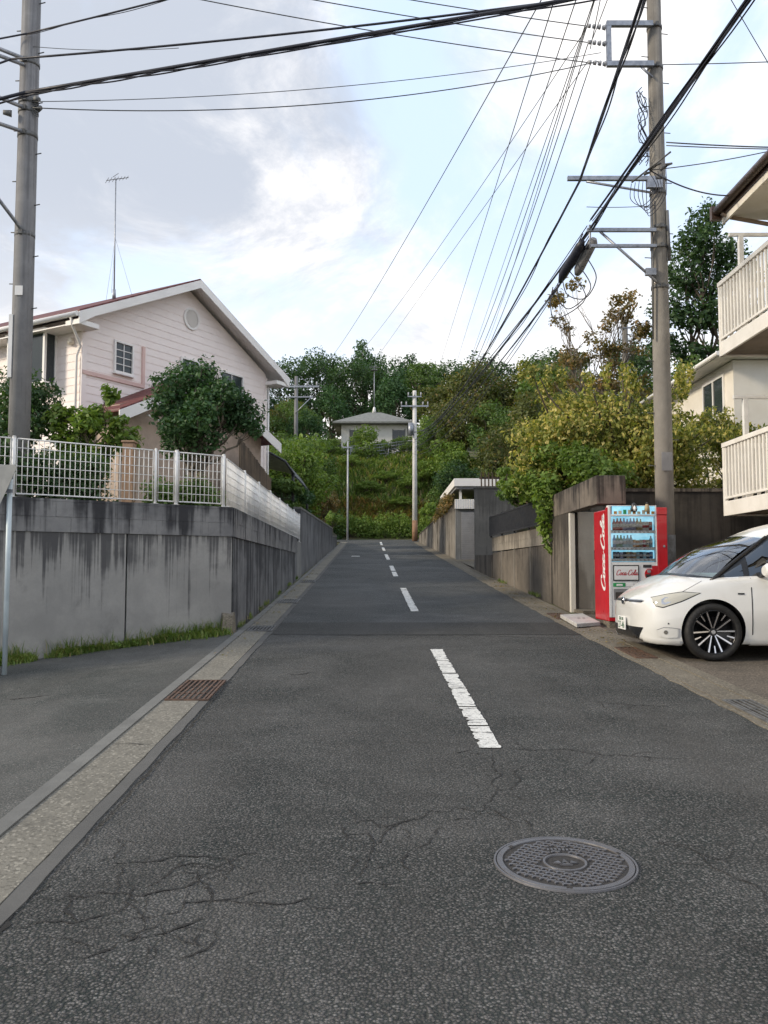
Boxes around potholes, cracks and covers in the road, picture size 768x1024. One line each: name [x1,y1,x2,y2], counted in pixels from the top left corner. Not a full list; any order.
drain grate [615,647,658,658]
crack [0,677,336,966]
drain grate [164,680,226,701]
drain grate [722,699,768,723]
crack [322,737,668,884]
manhole cover [493,836,639,894]
